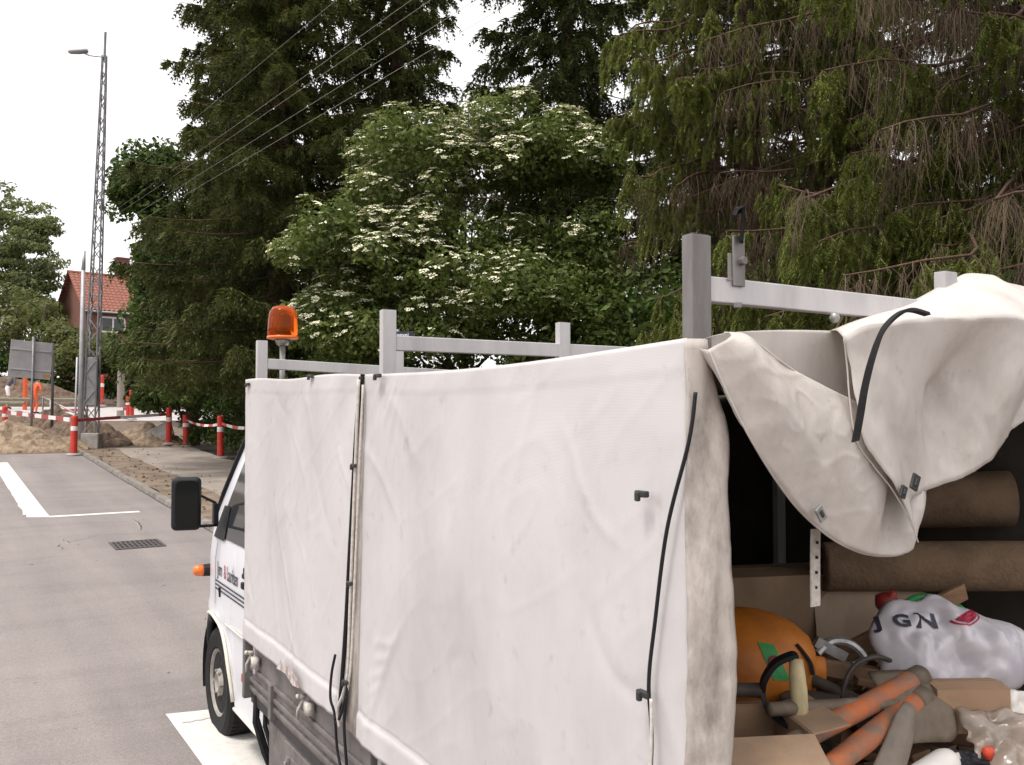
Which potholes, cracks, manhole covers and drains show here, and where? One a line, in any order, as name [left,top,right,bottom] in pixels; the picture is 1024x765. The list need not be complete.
drain grate [108,539,167,550]
crack [55,535,96,549]
